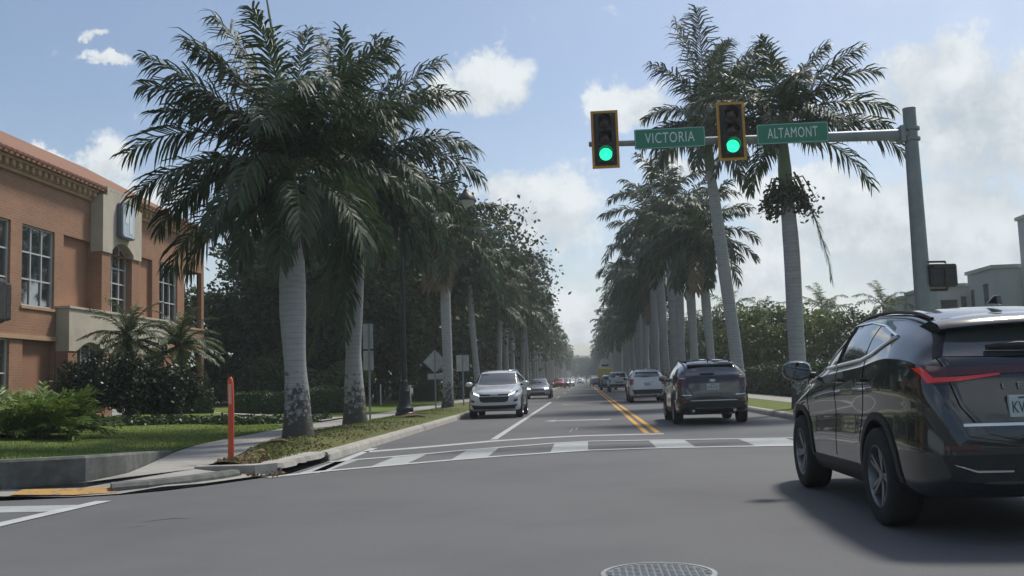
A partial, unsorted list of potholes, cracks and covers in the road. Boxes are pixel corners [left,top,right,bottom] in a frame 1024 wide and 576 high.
manhole cover [600,562,718,576]
drain grate [261,451,330,475]
